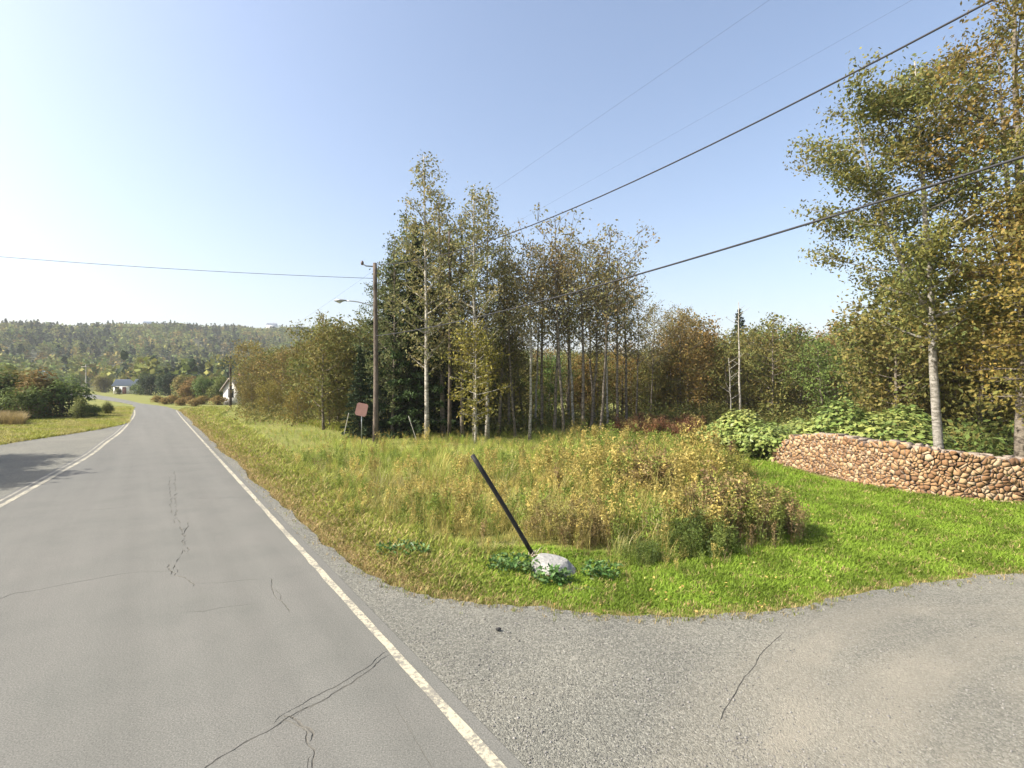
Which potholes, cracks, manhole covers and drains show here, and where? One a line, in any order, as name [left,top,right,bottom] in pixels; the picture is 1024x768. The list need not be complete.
crack [719,634,782,722]
crack [0,473,252,599]
crack [205,651,431,768]
